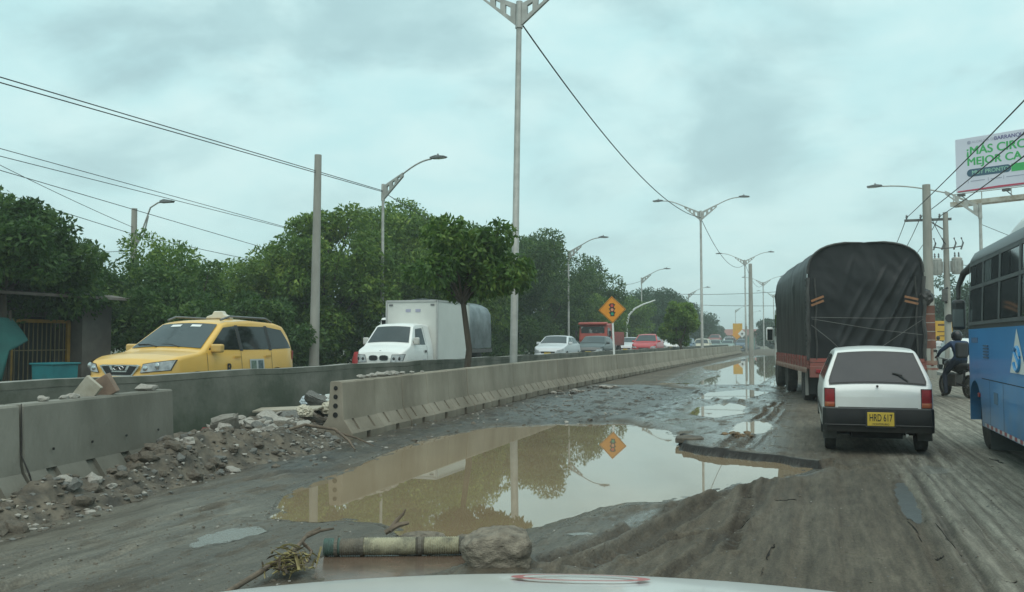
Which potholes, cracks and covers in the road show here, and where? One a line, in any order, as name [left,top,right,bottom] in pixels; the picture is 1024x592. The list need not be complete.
pothole [724,419,778,434]
pothole [683,400,752,418]
pothole [265,423,822,544]
pothole [690,355,776,385]
pothole [691,389,771,400]
